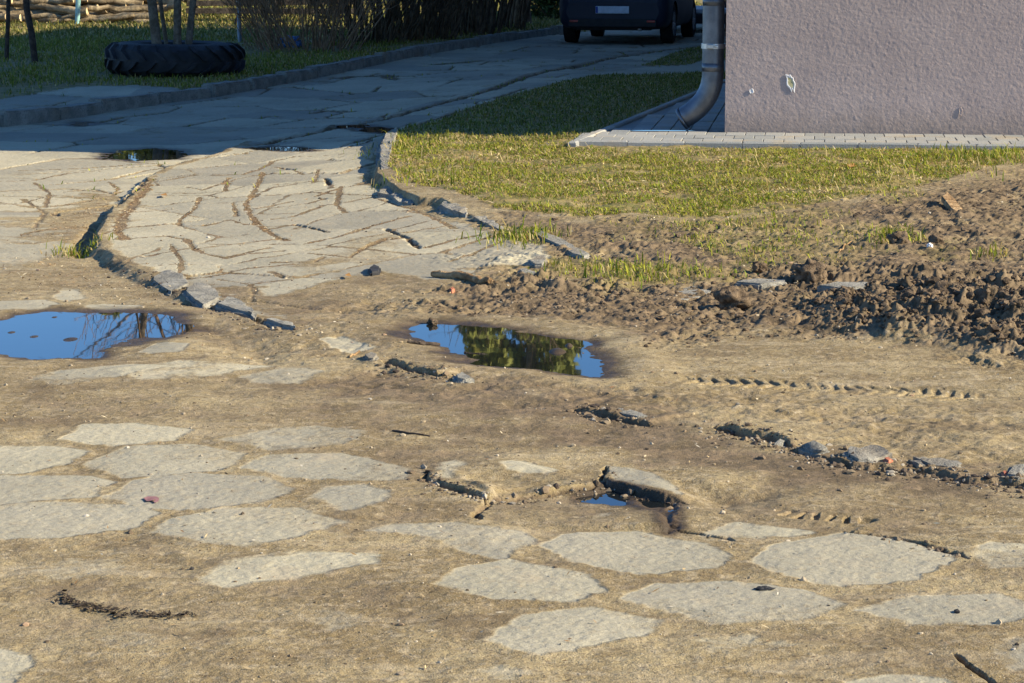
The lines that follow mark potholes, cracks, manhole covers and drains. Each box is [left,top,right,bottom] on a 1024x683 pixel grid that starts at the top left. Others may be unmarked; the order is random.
pothole [372,315,640,379]
crack [293,223,330,233]
crack [50,171,150,207]
pothole [90,146,198,162]
pothole [232,144,338,153]
pothole [569,479,687,535]
pothole [0,305,216,362]
